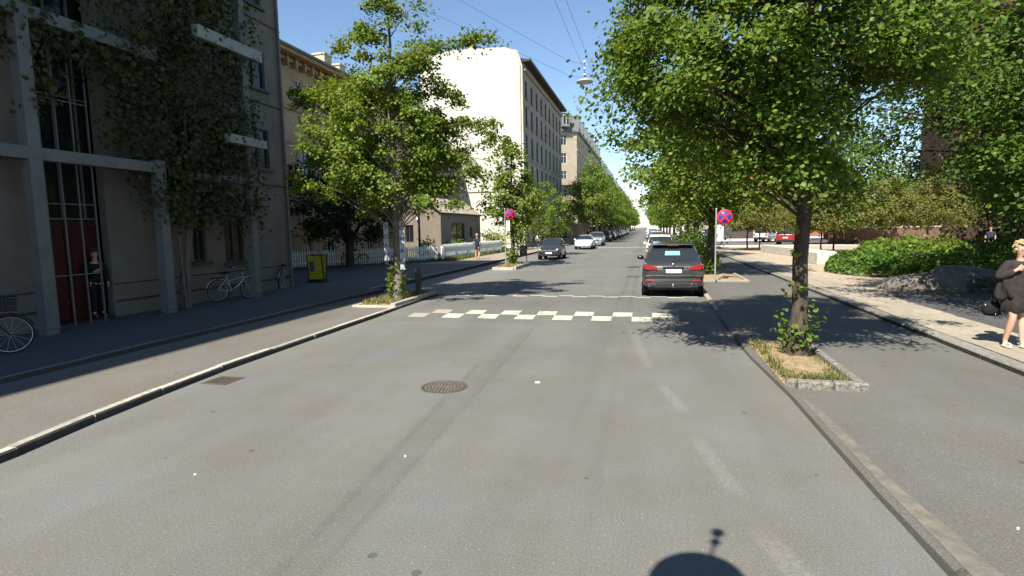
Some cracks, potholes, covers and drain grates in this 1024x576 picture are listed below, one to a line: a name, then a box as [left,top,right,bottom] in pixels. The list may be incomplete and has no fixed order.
drain grate [200,376,245,385]
manhole cover [421,380,467,394]
